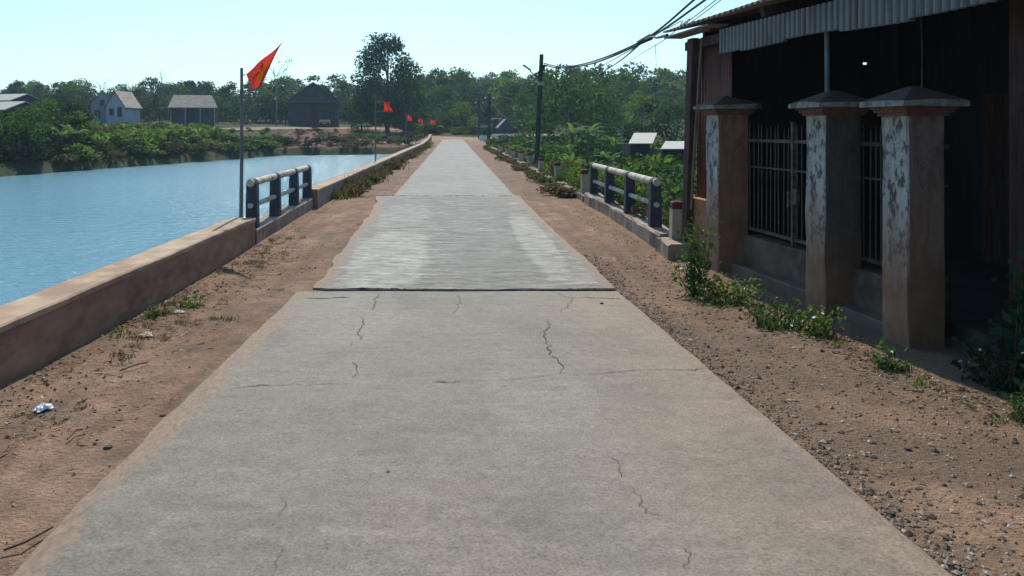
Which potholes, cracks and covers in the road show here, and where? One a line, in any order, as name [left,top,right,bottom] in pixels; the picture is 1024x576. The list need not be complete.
crack [234,295,697,388]
crack [611,455,691,570]
